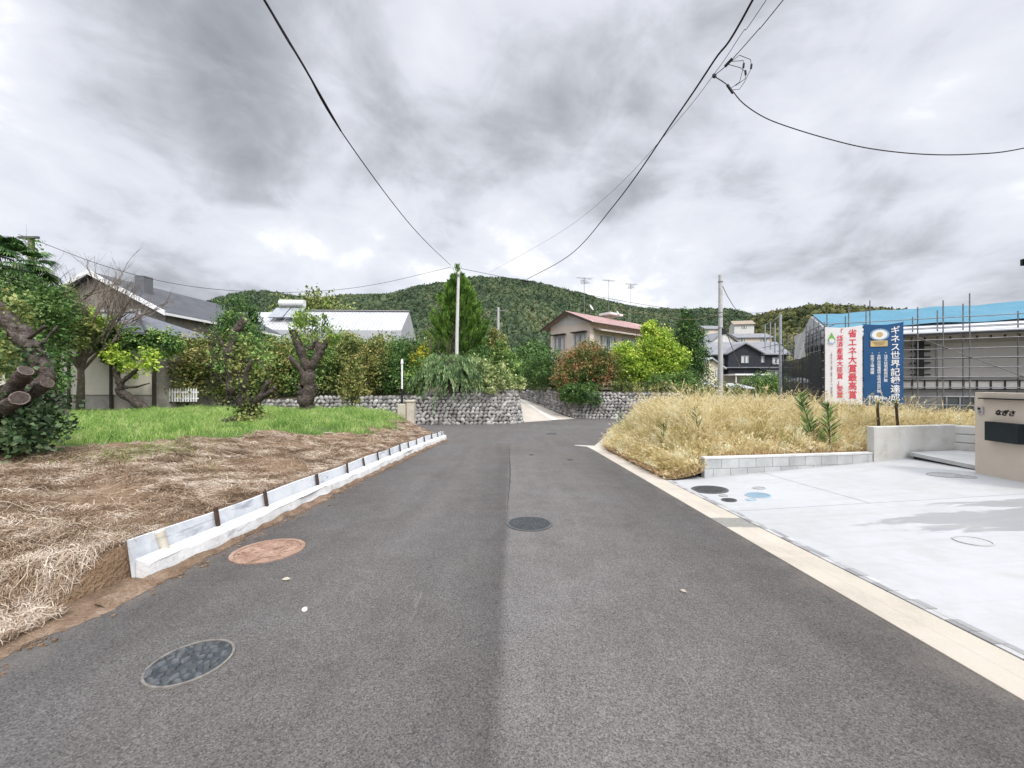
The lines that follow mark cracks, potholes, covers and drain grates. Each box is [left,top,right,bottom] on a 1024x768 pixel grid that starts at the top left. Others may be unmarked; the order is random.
manhole cover [507,516,552,532]
manhole cover [228,538,306,565]
manhole cover [140,639,235,690]
utility cover [952,536,995,547]
manhole cover [691,485,729,494]
